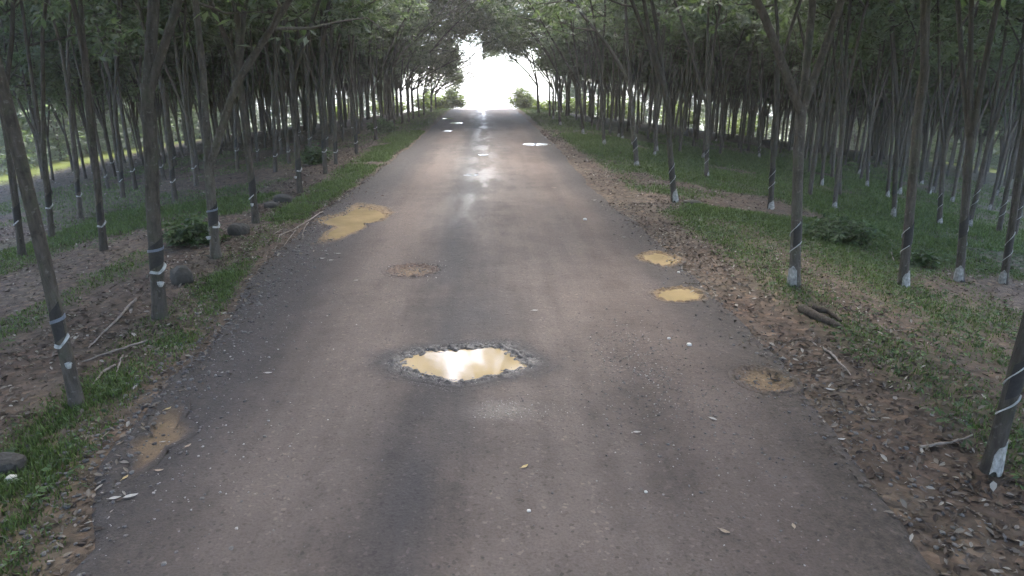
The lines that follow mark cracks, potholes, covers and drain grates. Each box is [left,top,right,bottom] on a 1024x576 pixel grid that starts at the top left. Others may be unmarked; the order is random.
pothole [634,249,687,268]
pothole [374,340,551,389]
pothole [728,363,804,396]
pothole [381,262,446,279]
pothole [118,400,199,482]
pothole [647,285,710,304]
pothole [309,201,397,246]
